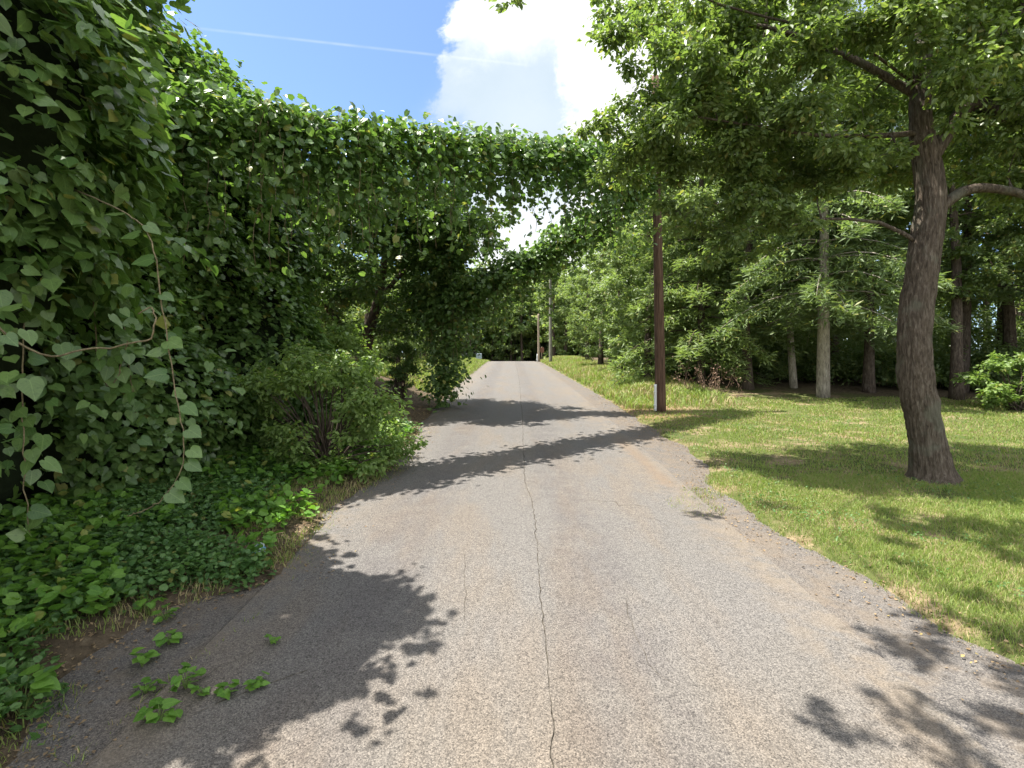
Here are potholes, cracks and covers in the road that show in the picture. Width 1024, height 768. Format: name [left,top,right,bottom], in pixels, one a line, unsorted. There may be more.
crack [516,366,555,768]
crack [626,598,673,683]
